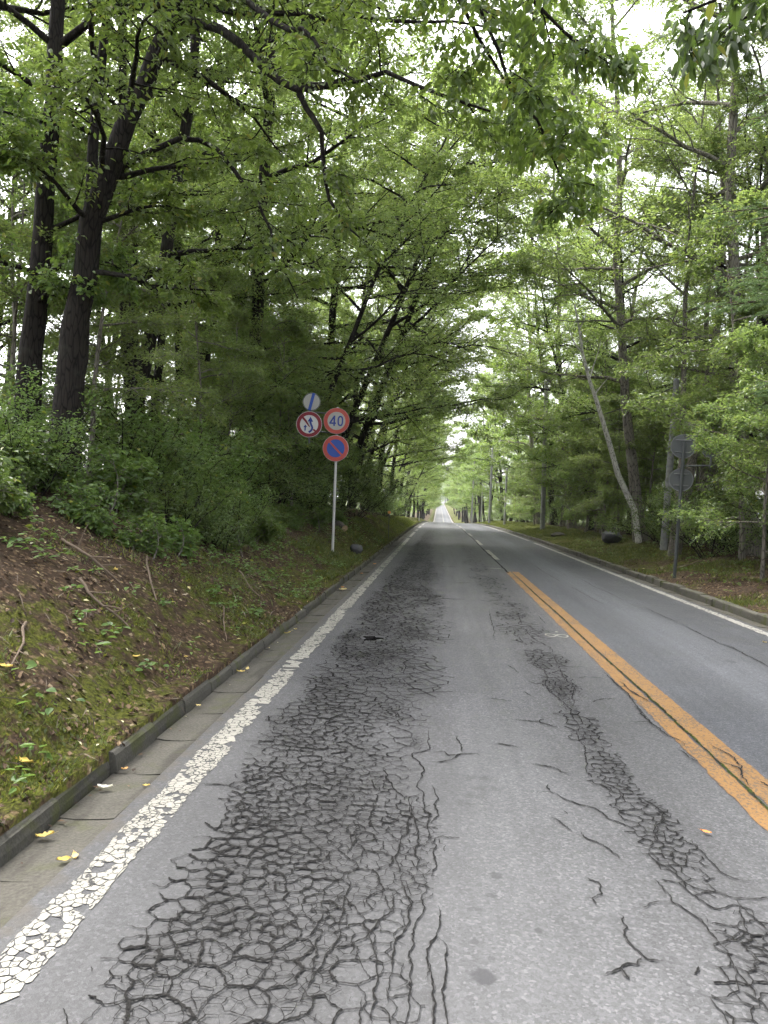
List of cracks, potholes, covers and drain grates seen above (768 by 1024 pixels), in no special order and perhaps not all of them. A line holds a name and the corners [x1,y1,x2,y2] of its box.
crack [63,530,479,1024]
crack [463,548,768,1024]
